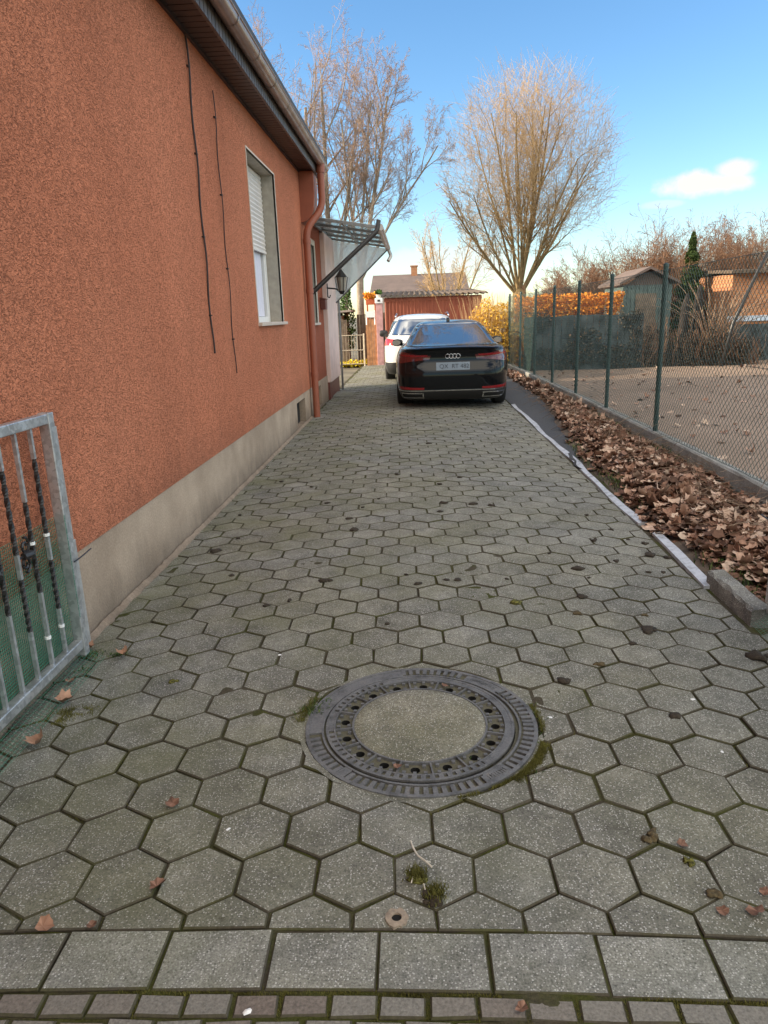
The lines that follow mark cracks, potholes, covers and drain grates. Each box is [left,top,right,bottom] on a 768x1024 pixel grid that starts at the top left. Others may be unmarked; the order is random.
manhole cover [305,668,538,799]
